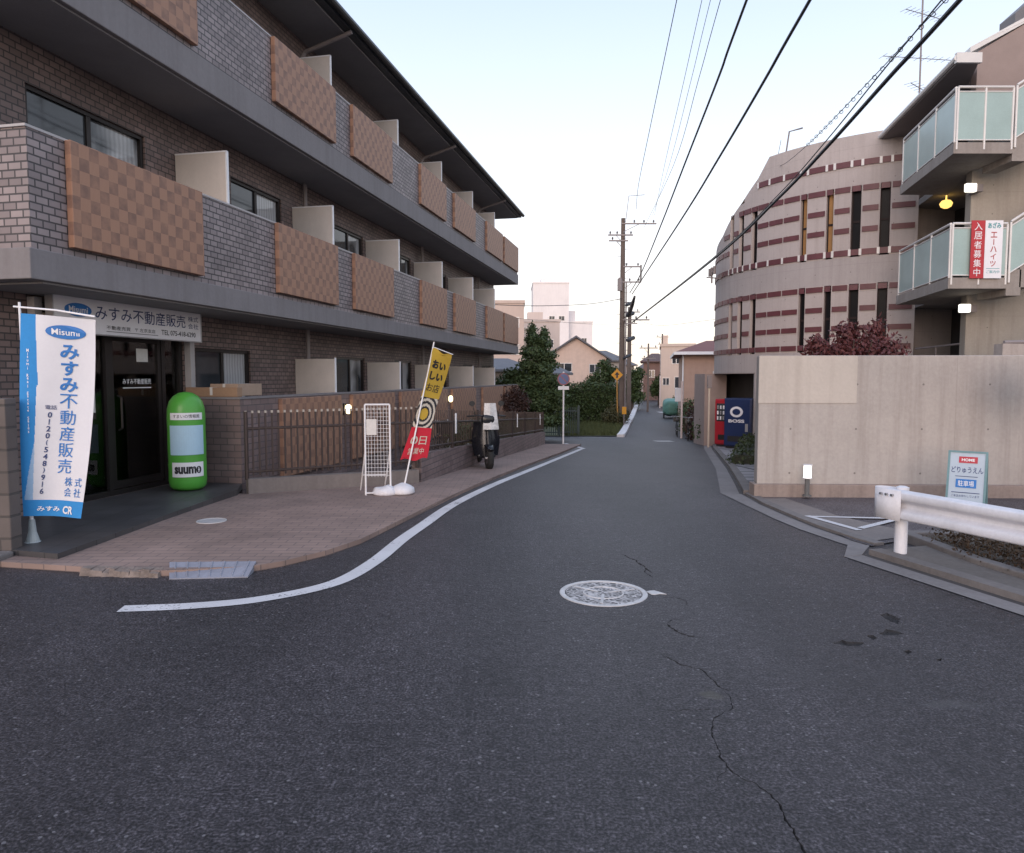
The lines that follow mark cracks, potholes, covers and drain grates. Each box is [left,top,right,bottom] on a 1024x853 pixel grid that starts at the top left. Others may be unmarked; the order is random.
manhole cover [560,580,667,607]
crack [667,657,807,853]
crack [667,597,695,637]
